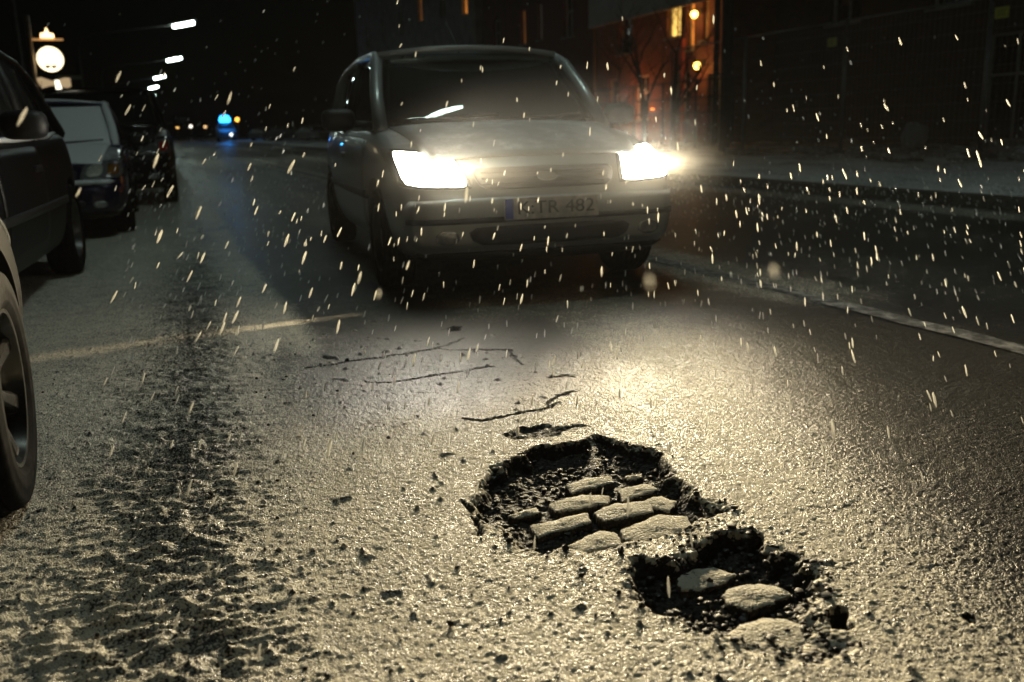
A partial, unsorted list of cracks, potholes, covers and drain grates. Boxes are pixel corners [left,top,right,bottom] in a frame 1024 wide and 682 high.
pothole [618,527,863,666]
pothole [501,423,591,440]
pothole [467,433,737,557]
crack [303,337,578,422]
